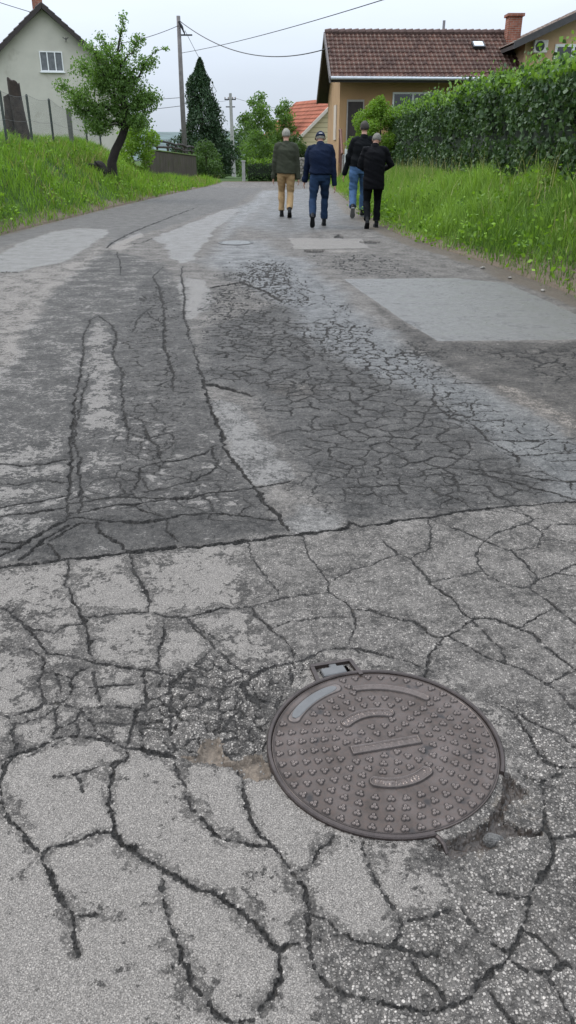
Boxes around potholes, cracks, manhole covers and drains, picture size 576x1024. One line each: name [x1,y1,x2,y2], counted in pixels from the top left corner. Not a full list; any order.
pothole [181,737,271,782]
crack [0,210,576,1024]
manhole cover [267,658,505,855]
